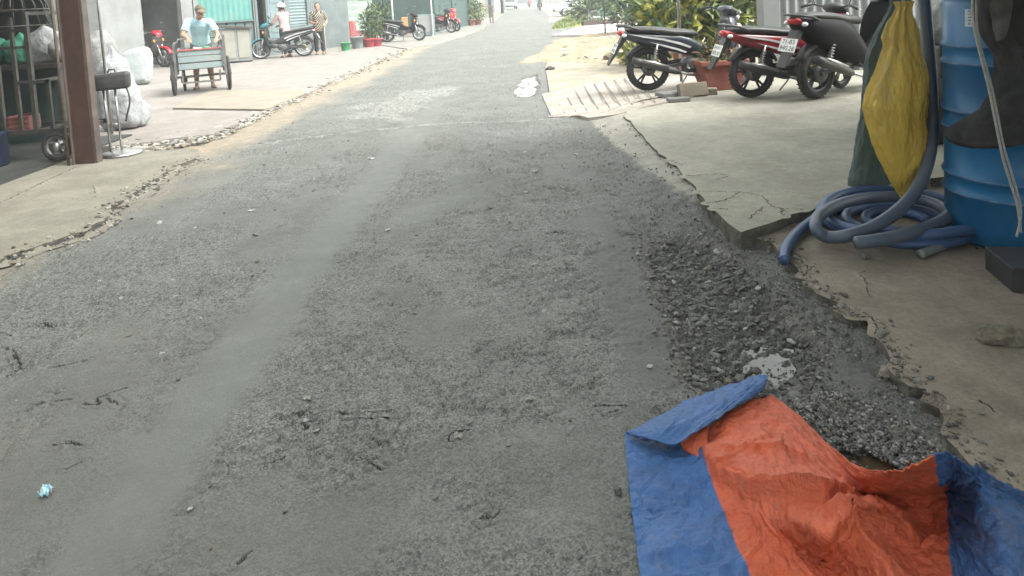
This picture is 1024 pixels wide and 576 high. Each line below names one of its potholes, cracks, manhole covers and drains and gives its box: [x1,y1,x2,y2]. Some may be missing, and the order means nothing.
crack [0,319,138,412]
crack [664,158,810,221]
crack [40,437,95,475]
crack [0,153,208,268]
crack [587,401,635,418]
crack [439,426,477,448]
pothole [638,235,827,401]
crack [844,269,883,338]
pothole [794,396,947,471]
